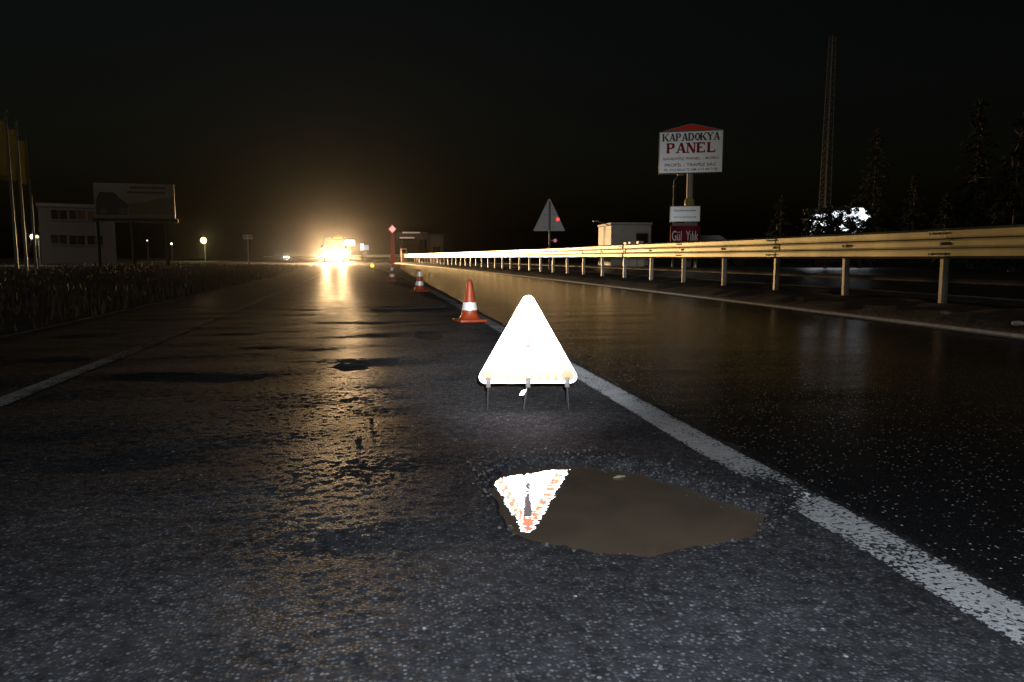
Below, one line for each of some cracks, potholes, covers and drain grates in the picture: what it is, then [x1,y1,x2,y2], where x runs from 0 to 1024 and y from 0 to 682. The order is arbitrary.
pothole [478,452,798,557]
pothole [330,363,370,372]
